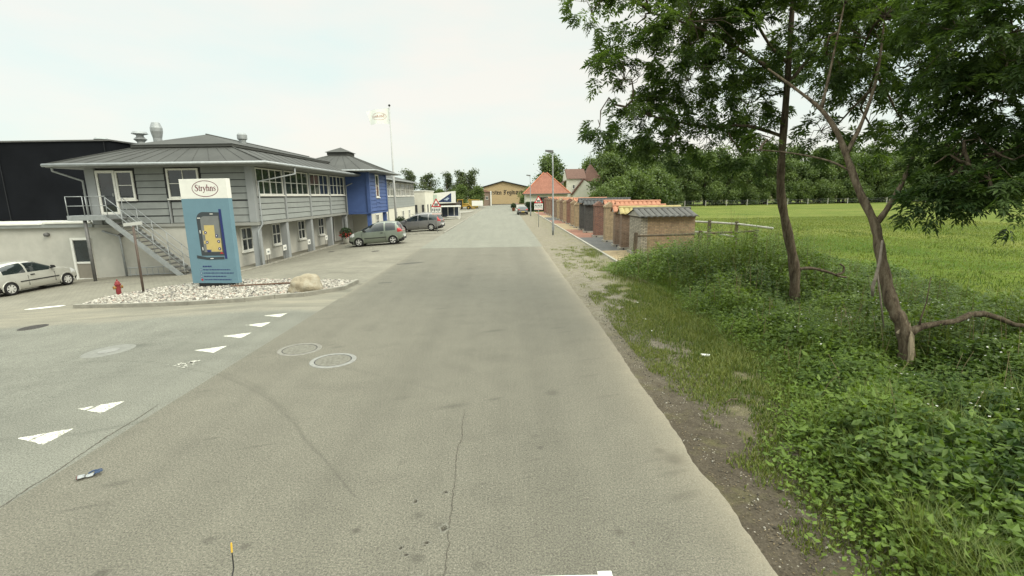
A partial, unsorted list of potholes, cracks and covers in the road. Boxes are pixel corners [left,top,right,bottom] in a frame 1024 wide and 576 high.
crack [443,410,465,576]
manhole cover [309,353,357,368]
manhole cover [277,343,322,356]
manhole cover [80,344,136,358]
